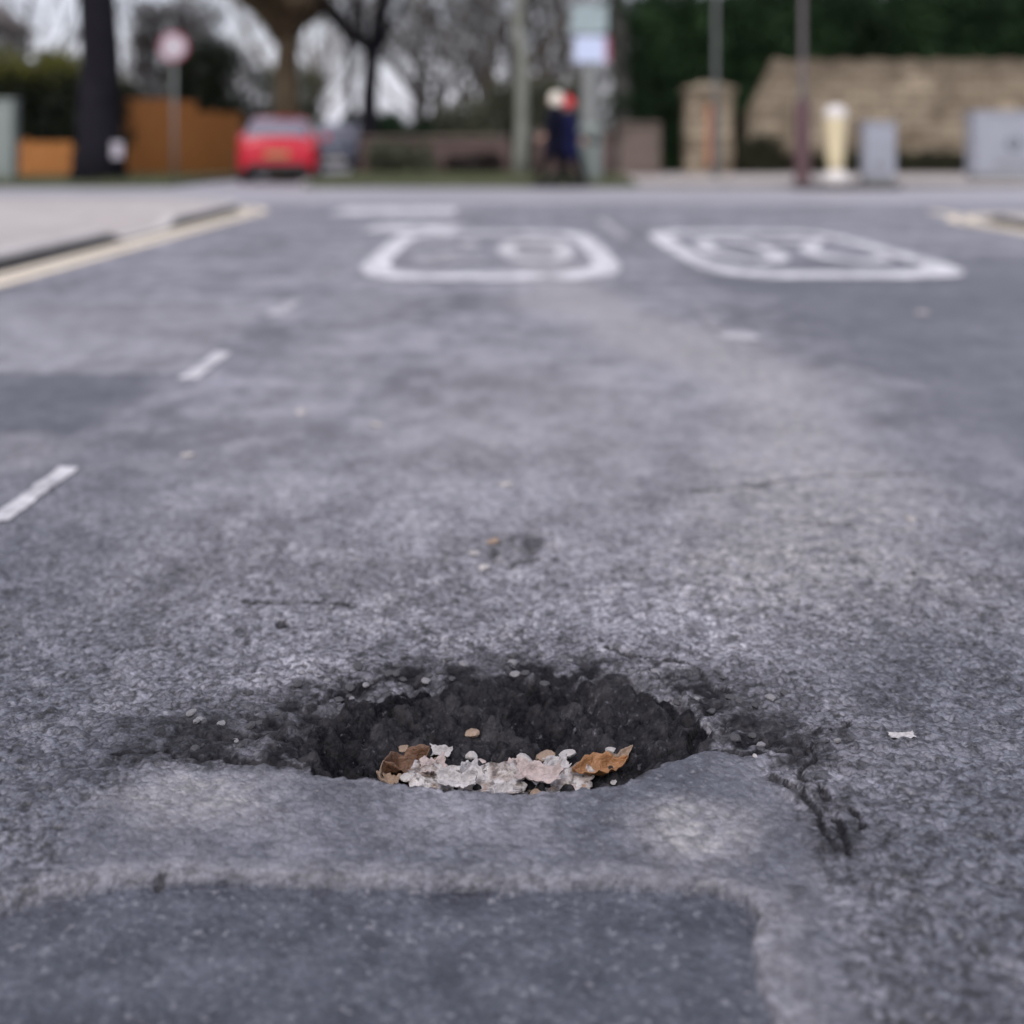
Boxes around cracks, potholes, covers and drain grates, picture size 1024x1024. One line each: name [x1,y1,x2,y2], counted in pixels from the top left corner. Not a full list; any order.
crack [710,720,870,859]
pothole [471,523,571,571]
pothole [297,677,715,795]
crack [239,599,359,610]
